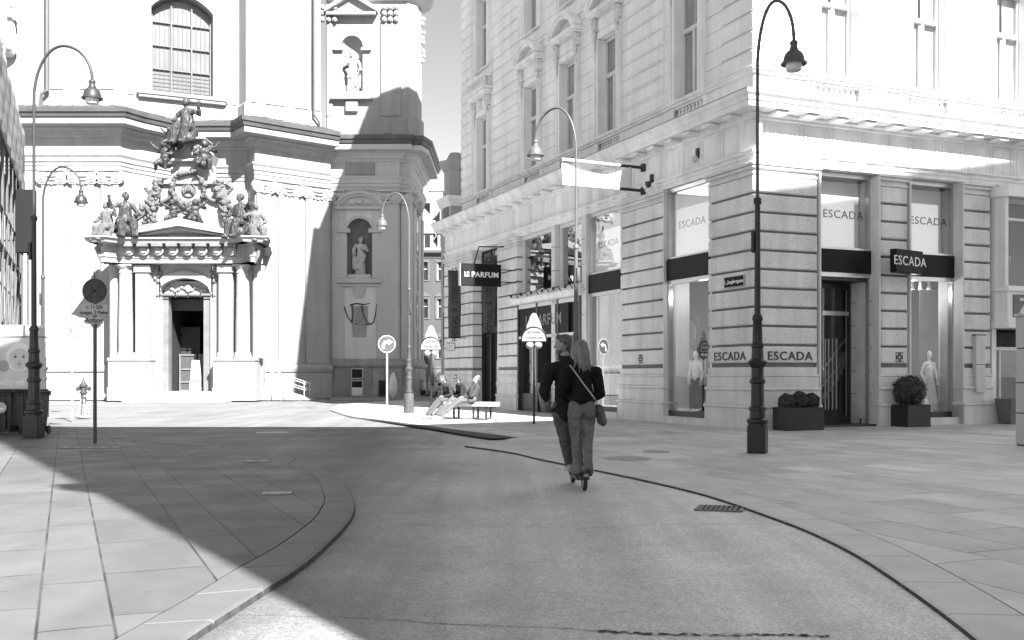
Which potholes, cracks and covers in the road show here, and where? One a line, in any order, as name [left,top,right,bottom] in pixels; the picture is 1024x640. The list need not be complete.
drain grate [694,504,744,512]
